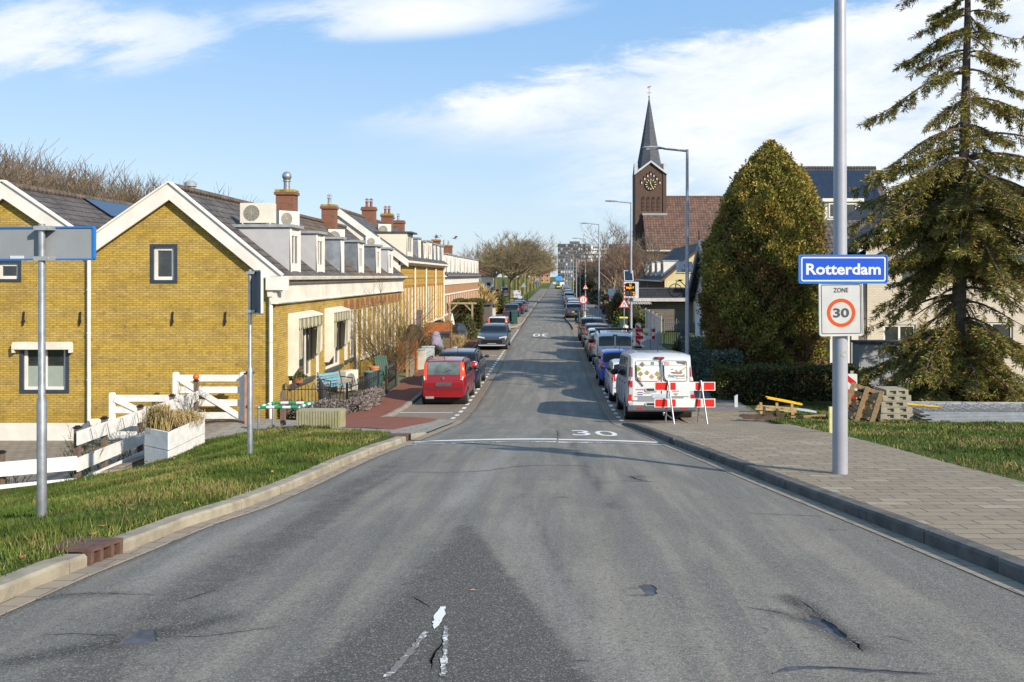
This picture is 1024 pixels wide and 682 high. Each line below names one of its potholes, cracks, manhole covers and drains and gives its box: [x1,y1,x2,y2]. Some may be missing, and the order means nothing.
pothole [638,584,658,596]
crack [429,639,444,669]
pothole [796,615,847,639]
crack [47,628,263,638]
pothole [115,627,157,647]
